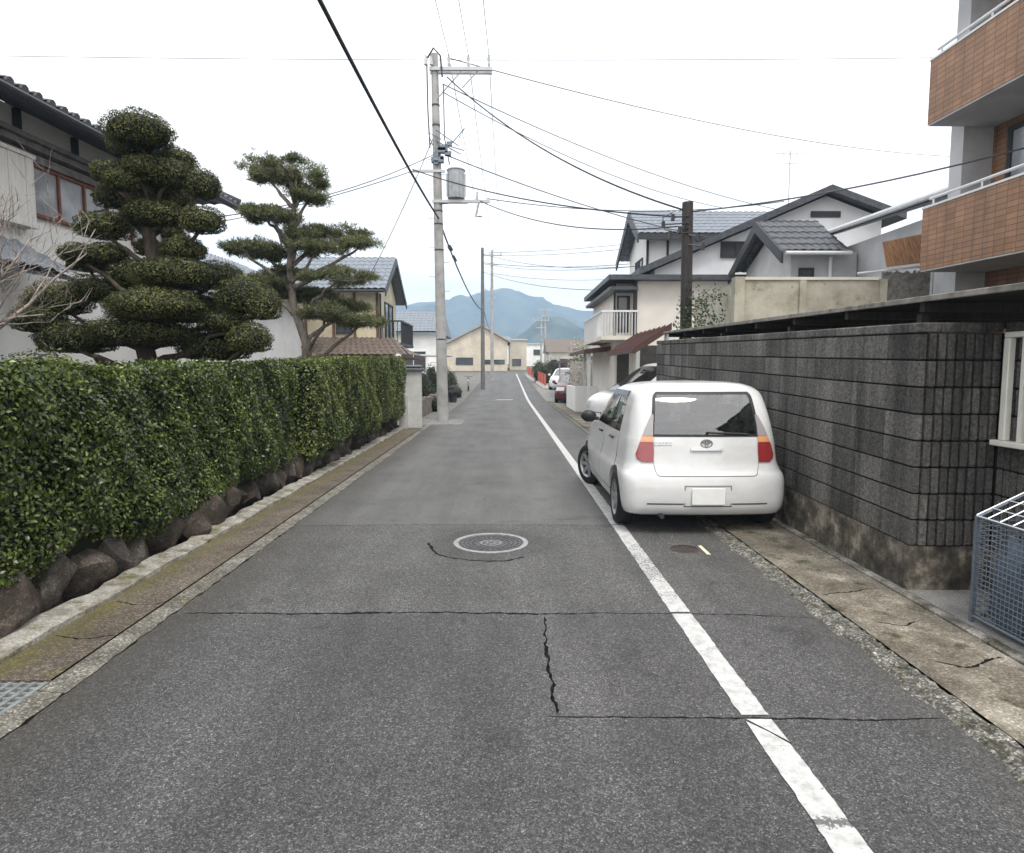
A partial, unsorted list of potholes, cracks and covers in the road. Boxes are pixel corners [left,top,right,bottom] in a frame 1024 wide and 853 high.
crack [936,657,1002,668]
utility cover [670,545,699,553]
manhole cover [454,533,528,554]
crack [188,611,941,743]
crack [427,543,524,562]
drain grate [0,682,50,715]
